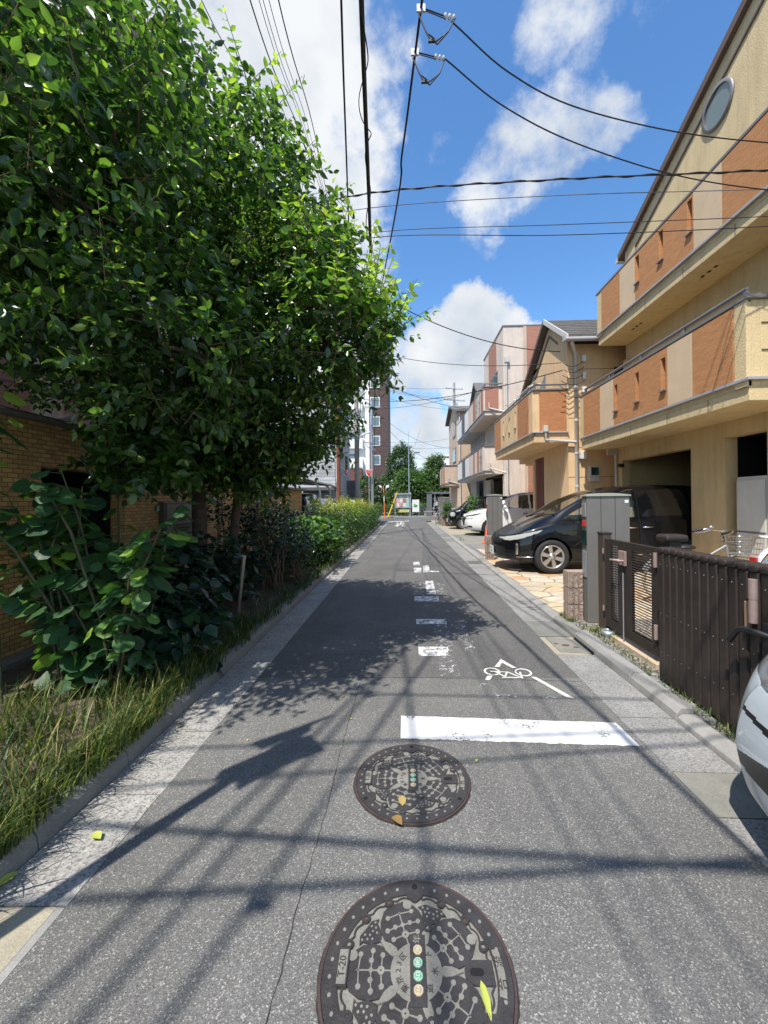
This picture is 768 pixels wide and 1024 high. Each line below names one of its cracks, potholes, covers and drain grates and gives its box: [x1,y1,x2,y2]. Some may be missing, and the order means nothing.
manhole cover [316,880,520,1024]
manhole cover [353,744,471,827]
crack [265,654,582,1024]
